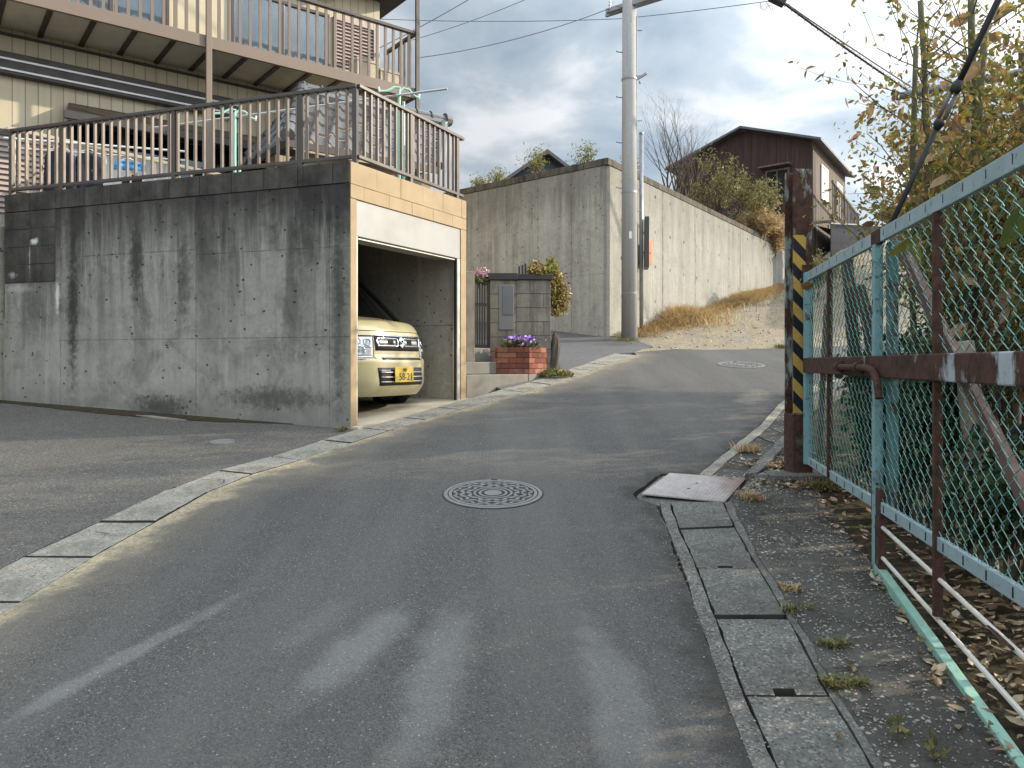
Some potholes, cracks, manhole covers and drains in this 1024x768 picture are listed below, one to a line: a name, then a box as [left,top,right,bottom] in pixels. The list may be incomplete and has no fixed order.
manhole cover [442,479,544,509]
